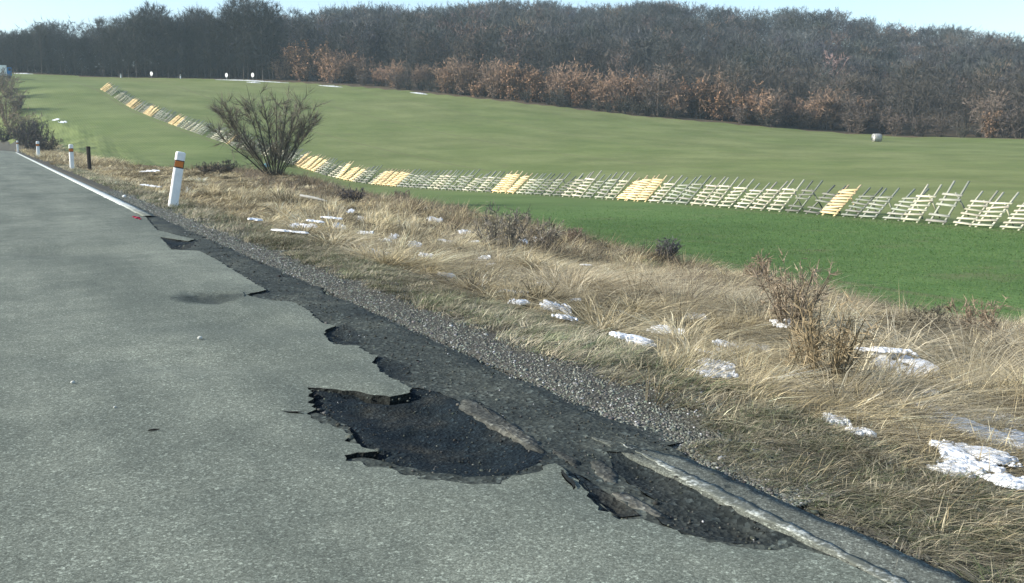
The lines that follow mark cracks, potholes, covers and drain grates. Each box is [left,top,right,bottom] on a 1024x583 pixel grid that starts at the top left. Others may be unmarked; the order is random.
pothole [325,324,360,344]
pothole [574,473,640,517]
pothole [312,388,547,477]
pothole [607,452,789,546]
pothole [375,356,412,381]
